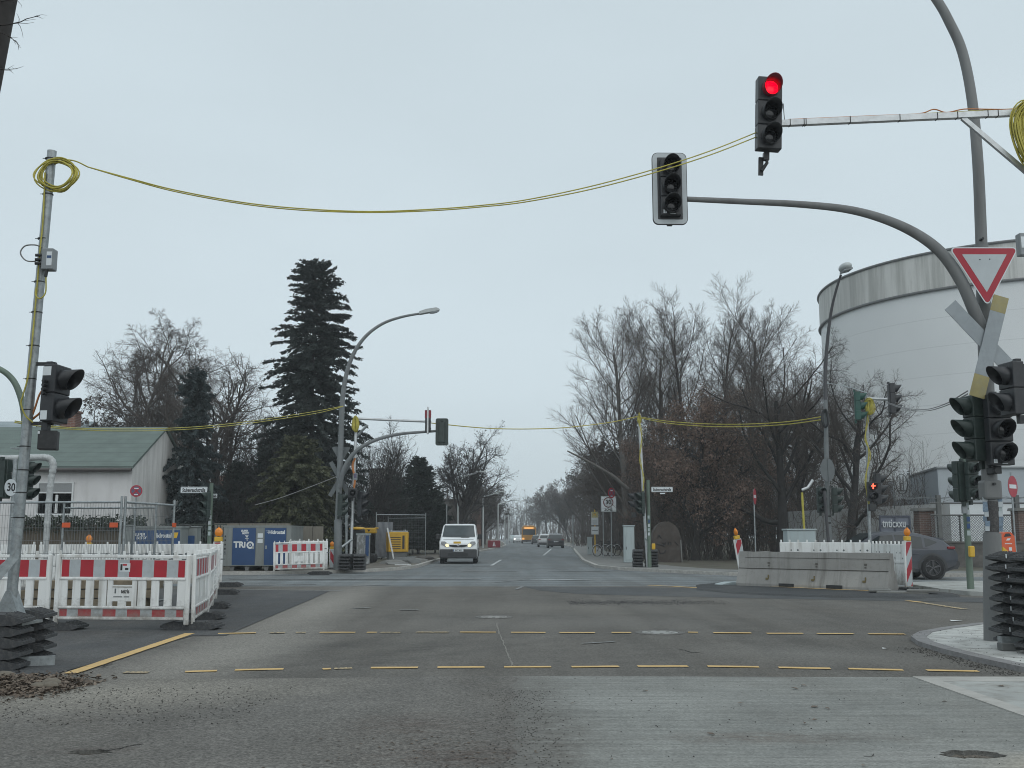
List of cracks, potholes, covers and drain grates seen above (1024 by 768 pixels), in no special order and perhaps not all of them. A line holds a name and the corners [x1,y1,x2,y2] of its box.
crack [496,623,515,666]
